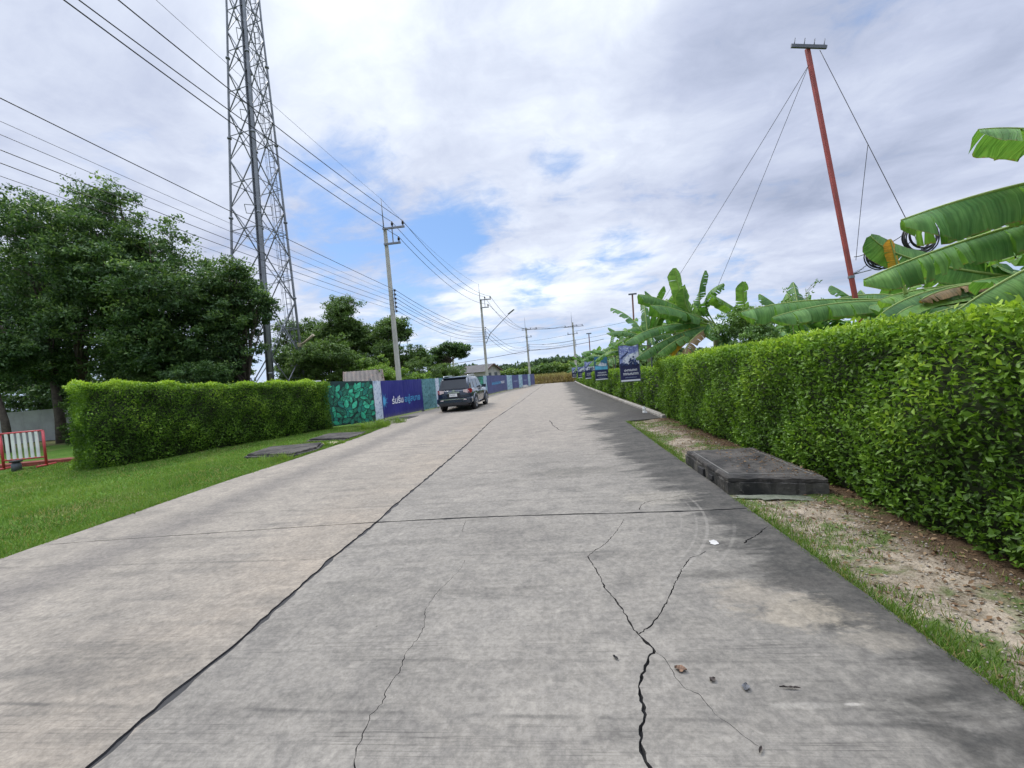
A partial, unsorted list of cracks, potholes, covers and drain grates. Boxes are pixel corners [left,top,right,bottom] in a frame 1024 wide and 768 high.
crack [588,493,760,768]
crack [353,561,465,768]
